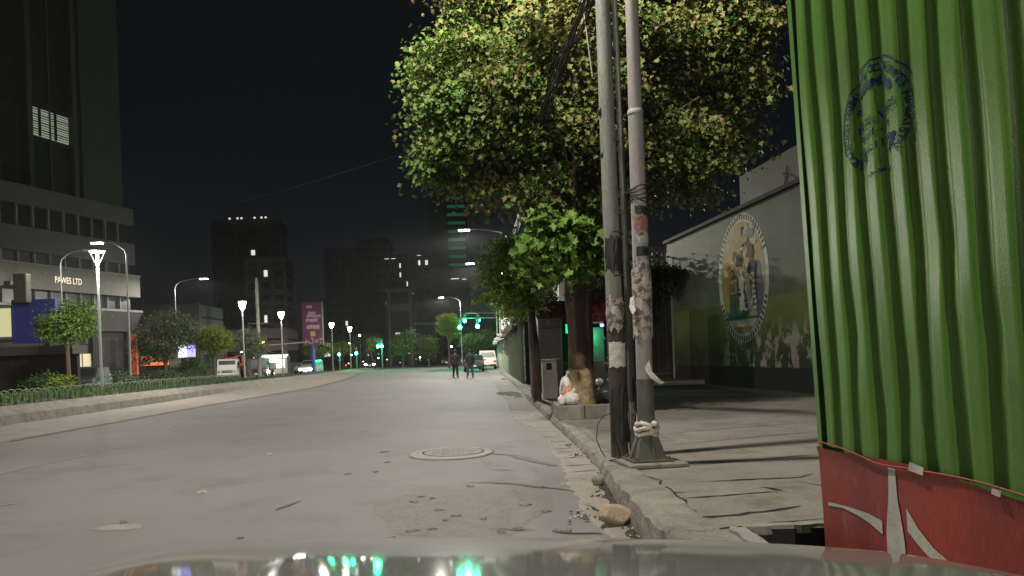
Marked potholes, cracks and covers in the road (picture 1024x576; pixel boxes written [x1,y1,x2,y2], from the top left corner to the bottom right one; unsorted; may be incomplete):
manhole cover [410,447,492,460]
crack [408,397,640,539]
